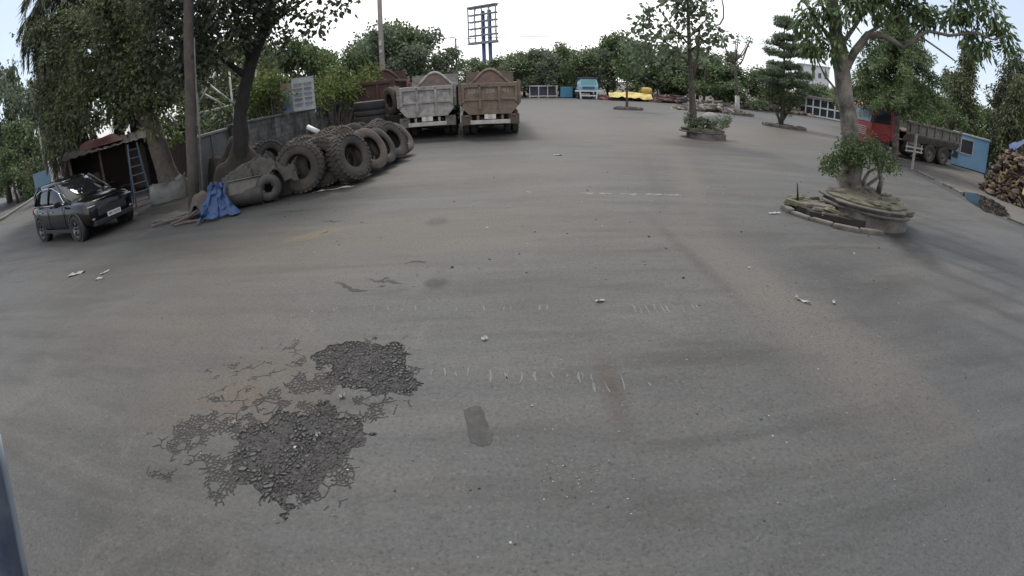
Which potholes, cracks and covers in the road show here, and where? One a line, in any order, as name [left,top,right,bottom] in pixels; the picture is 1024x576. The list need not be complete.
crack [147,336,423,519]
pothole [310,337,424,396]
pothole [224,400,376,521]
